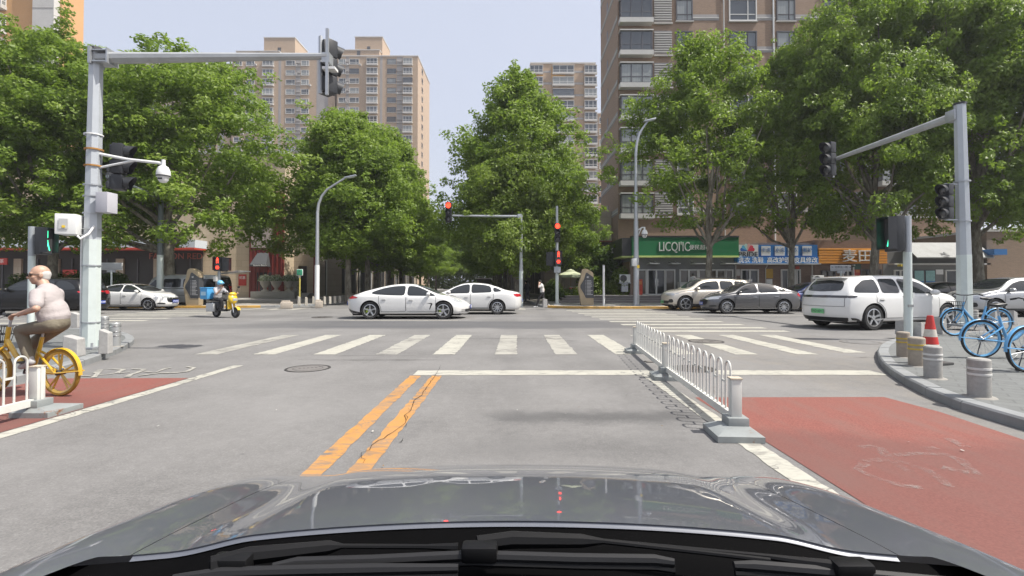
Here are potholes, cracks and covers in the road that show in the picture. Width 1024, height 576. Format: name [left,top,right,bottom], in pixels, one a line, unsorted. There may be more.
crack [361,368,440,461]
